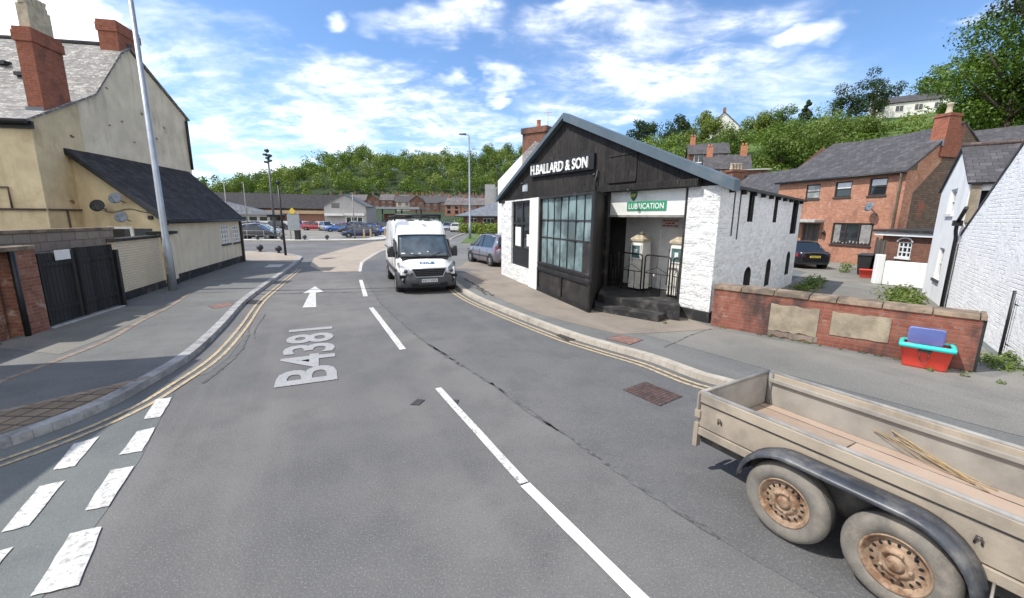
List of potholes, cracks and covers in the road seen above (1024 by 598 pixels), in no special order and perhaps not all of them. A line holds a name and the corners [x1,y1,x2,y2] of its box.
manhole cover [606,335,643,345]
crack [201,314,266,384]
manhole cover [623,381,683,407]
